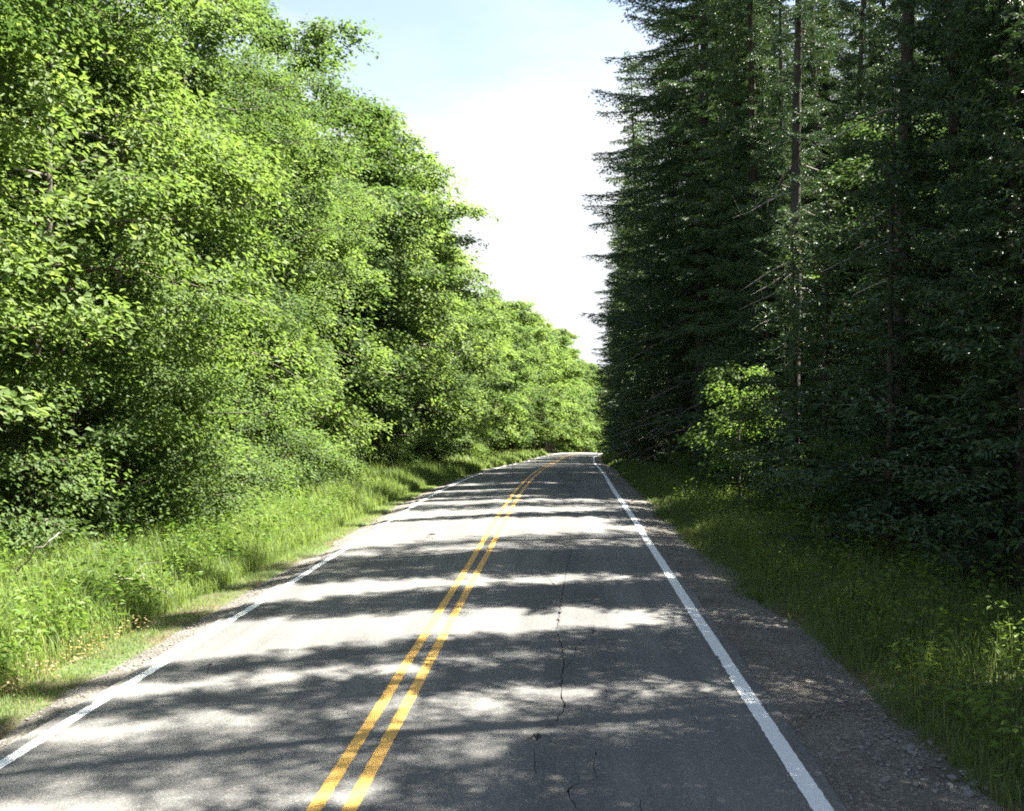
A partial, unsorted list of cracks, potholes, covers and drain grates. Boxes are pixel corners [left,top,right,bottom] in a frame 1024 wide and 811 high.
crack [539,535,595,731]
crack [566,749,598,811]
